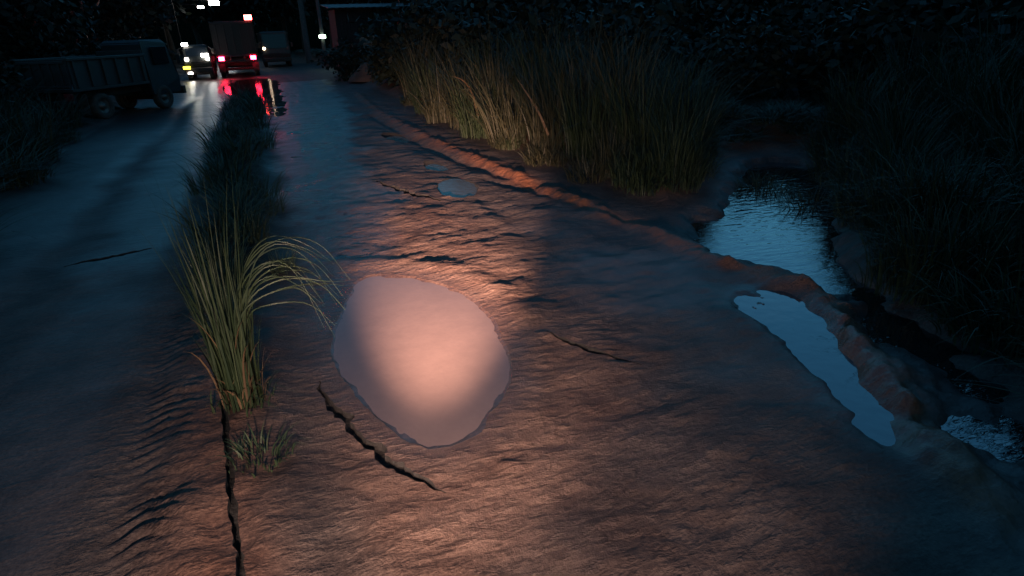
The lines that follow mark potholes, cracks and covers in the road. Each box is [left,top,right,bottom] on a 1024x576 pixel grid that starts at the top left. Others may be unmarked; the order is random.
pothole [331,274,512,449]
crack [546,331,642,365]
crack [375,180,441,201]
crack [64,248,151,267]
pothole [423,160,449,172]
pothole [436,178,479,198]
